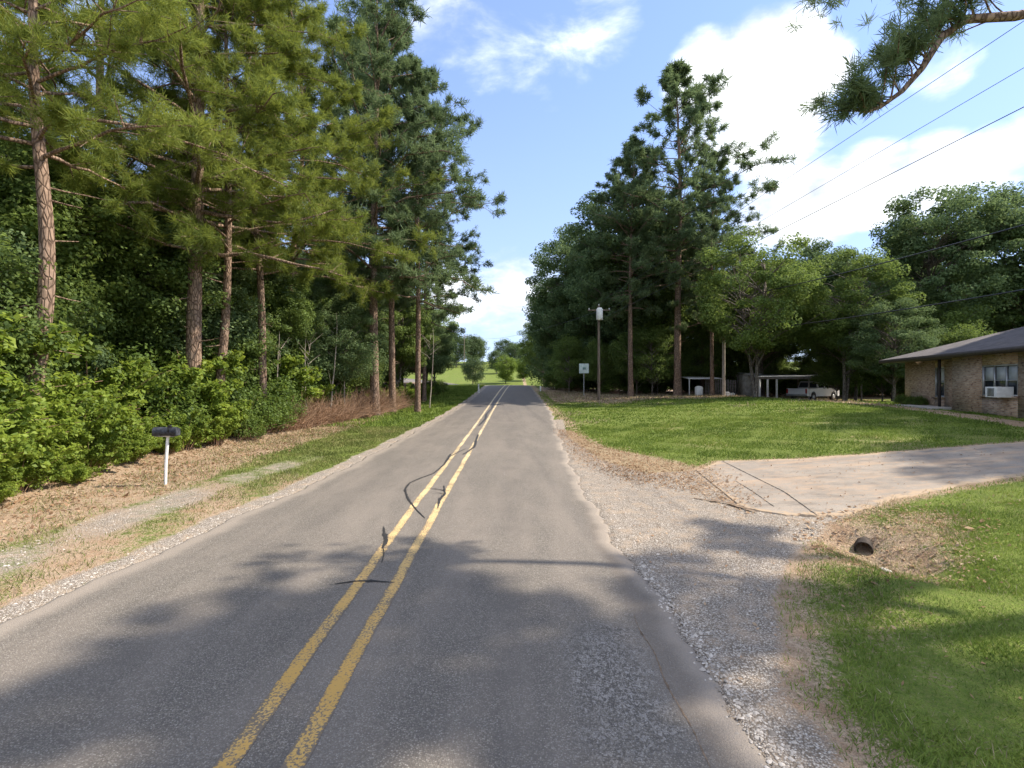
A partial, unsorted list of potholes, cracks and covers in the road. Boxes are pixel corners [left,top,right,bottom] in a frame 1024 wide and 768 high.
crack [695,461,814,513]
